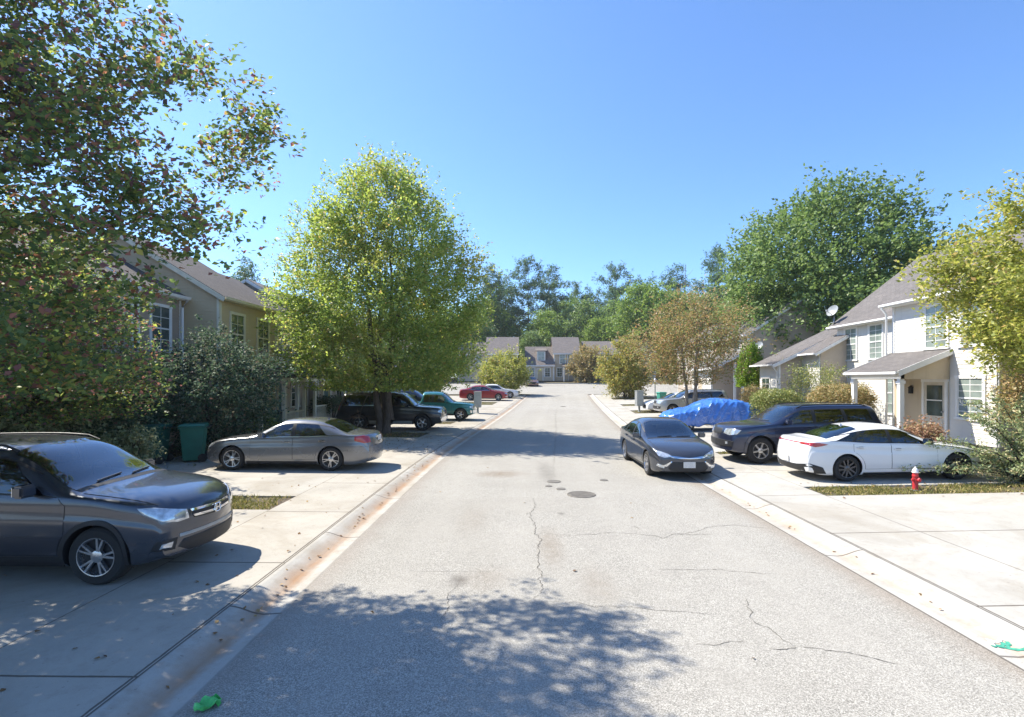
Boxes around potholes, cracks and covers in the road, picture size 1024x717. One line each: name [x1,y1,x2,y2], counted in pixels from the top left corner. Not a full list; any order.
crack [708,599,895,664]
crack [523,497,741,599]
